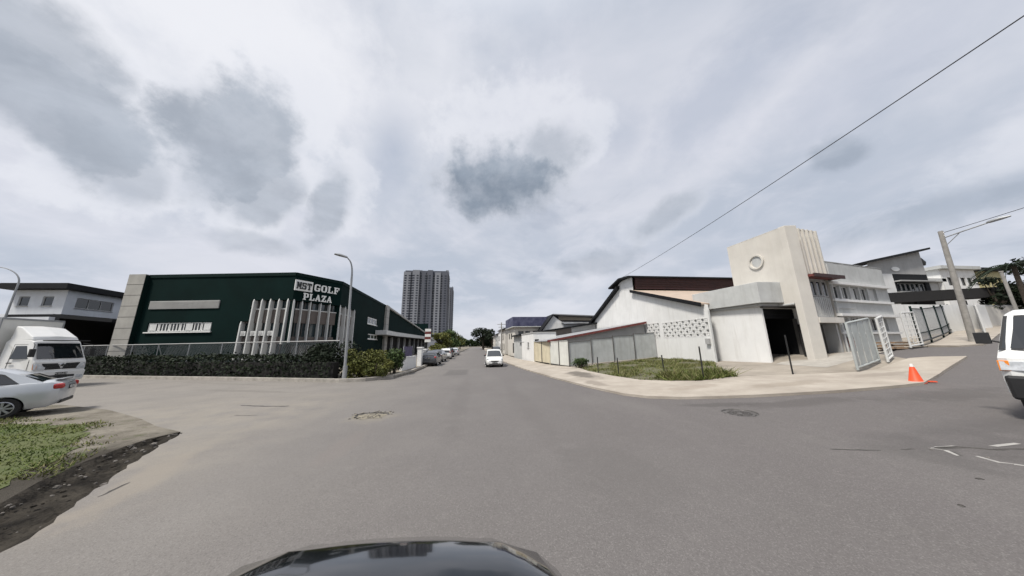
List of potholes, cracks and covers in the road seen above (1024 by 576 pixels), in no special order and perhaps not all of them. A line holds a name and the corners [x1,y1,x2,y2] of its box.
pothole [349,410,394,420]
manhole cover [720,409,759,417]
